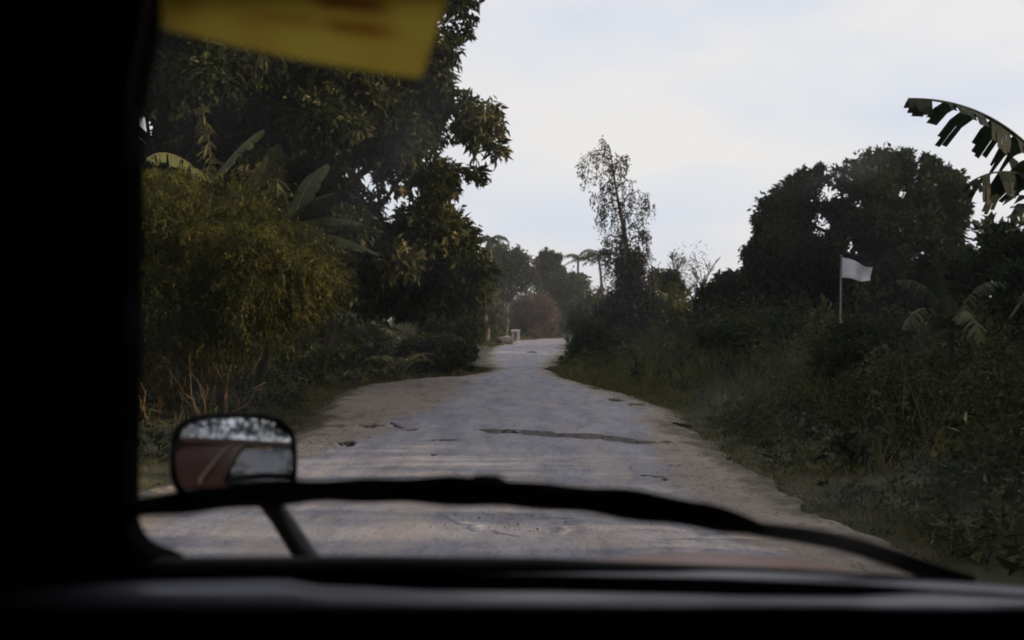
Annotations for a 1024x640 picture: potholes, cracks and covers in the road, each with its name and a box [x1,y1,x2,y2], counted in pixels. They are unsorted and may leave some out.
pothole [332,439,363,449]
